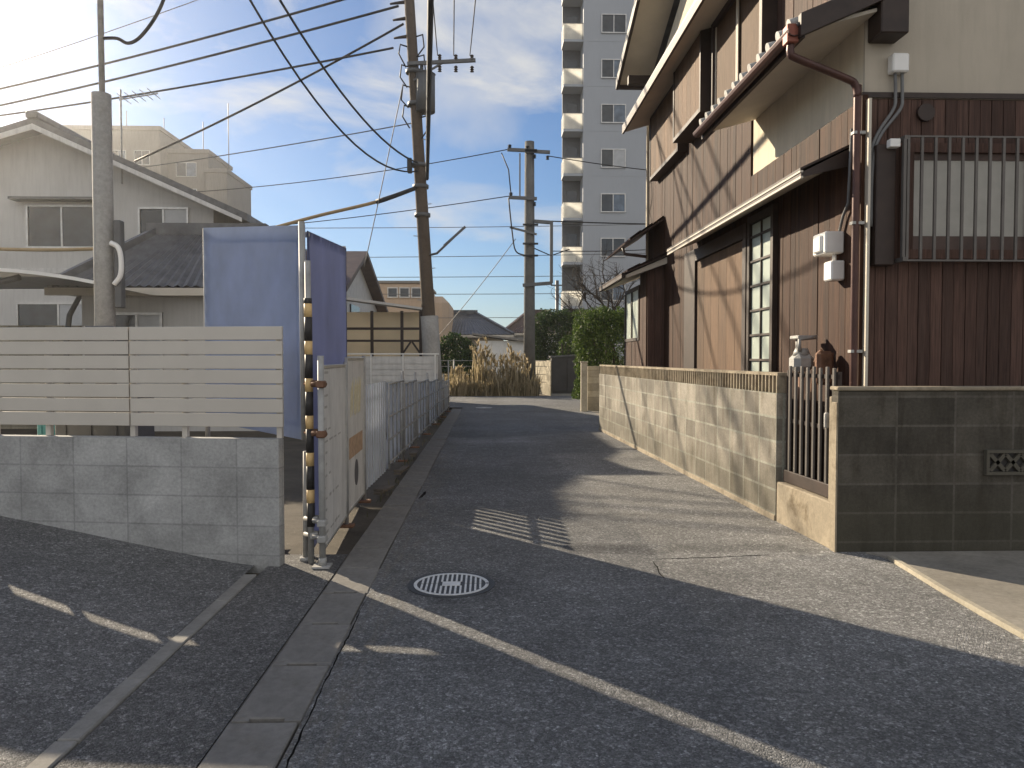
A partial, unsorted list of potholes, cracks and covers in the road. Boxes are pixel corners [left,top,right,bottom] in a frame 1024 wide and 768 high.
crack [652,555,761,578]
